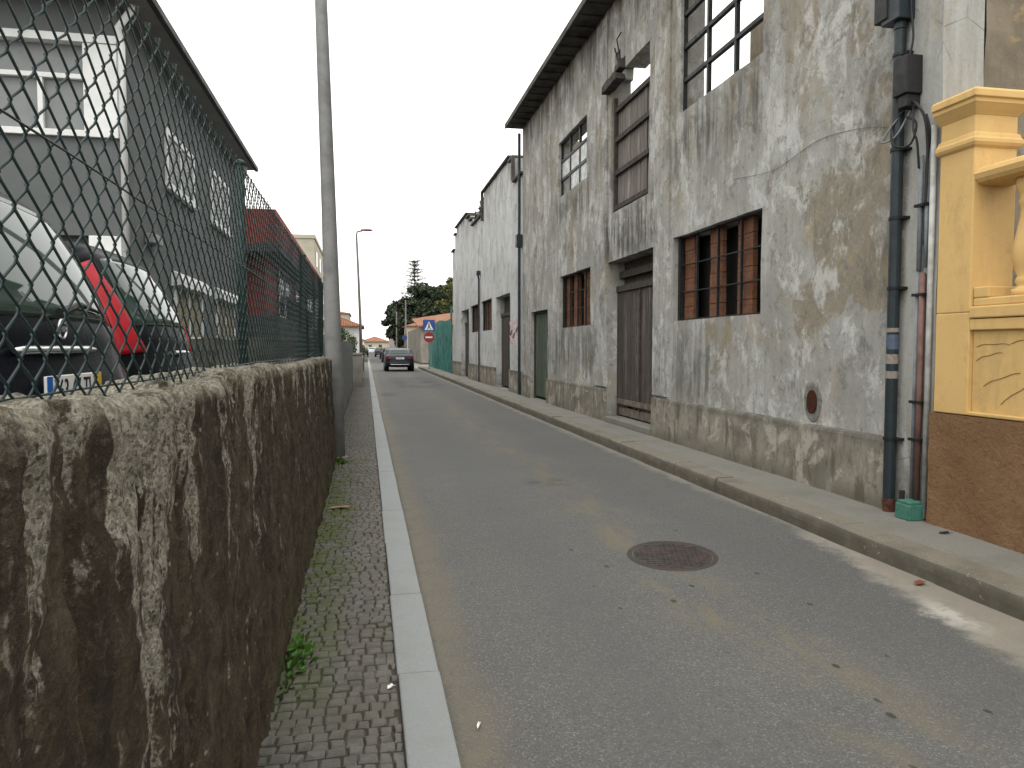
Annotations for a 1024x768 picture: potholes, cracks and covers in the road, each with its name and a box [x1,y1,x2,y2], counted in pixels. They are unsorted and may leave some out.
manhole cover [627,541,718,571]
